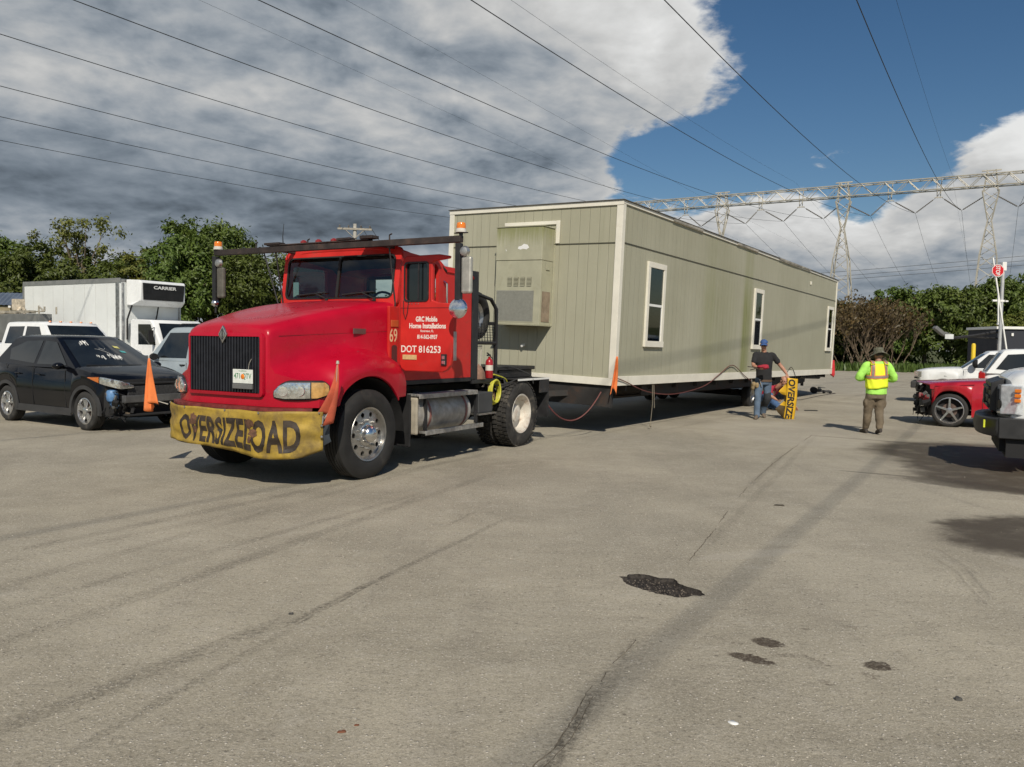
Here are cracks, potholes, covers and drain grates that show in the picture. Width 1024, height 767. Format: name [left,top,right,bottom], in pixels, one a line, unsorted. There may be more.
crack [532,640,636,767]
pothole [619,574,705,598]
crack [689,437,809,561]
